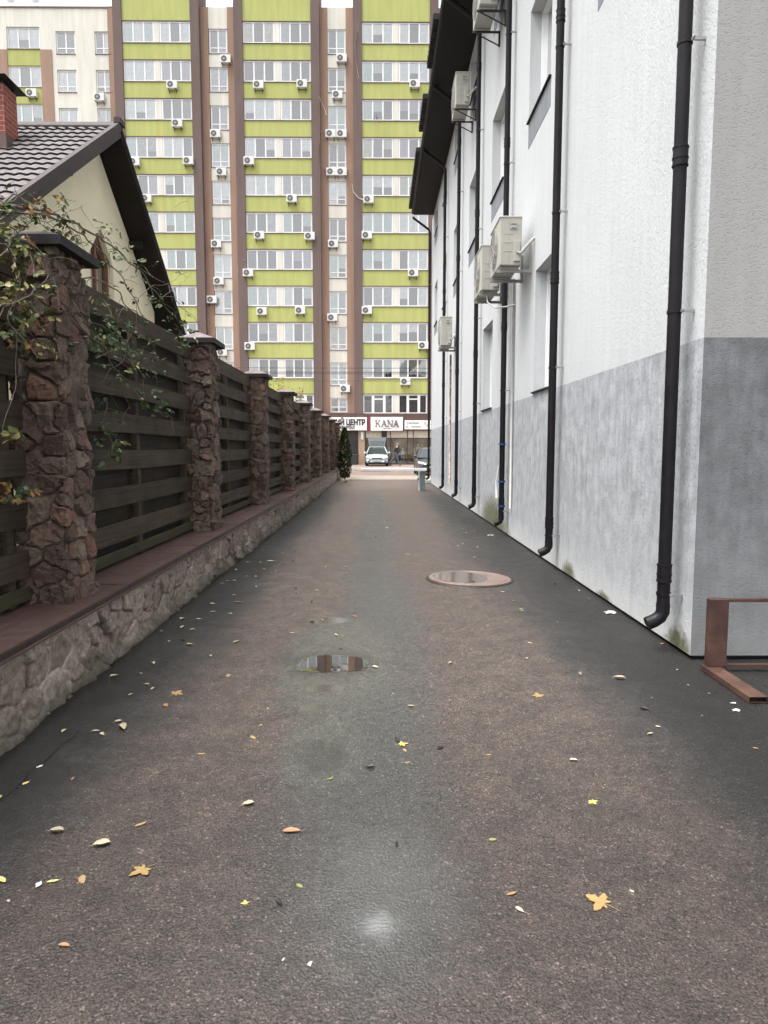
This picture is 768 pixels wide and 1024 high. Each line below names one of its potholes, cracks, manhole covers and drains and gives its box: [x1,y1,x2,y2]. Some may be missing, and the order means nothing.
crack [1,730,79,799]
manhole cover [426,571,514,588]
